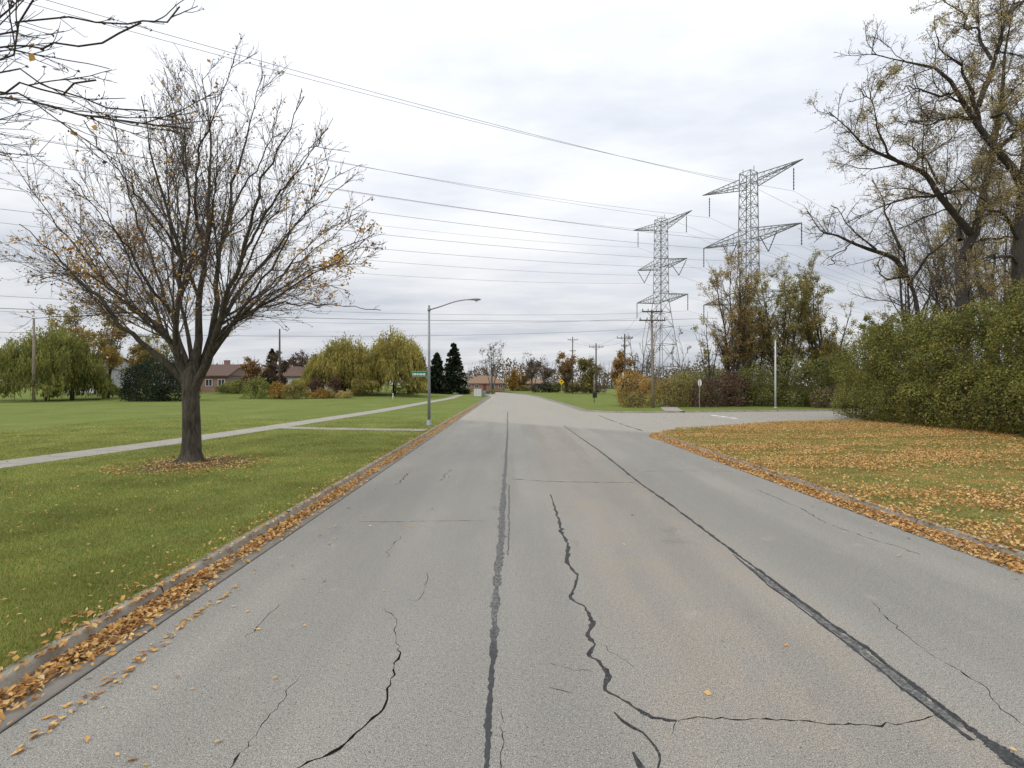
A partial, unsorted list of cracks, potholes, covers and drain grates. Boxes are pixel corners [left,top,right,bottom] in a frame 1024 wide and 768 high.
crack [875,605,1023,725]
crack [671,716,933,735]
crack [230,608,401,768]
